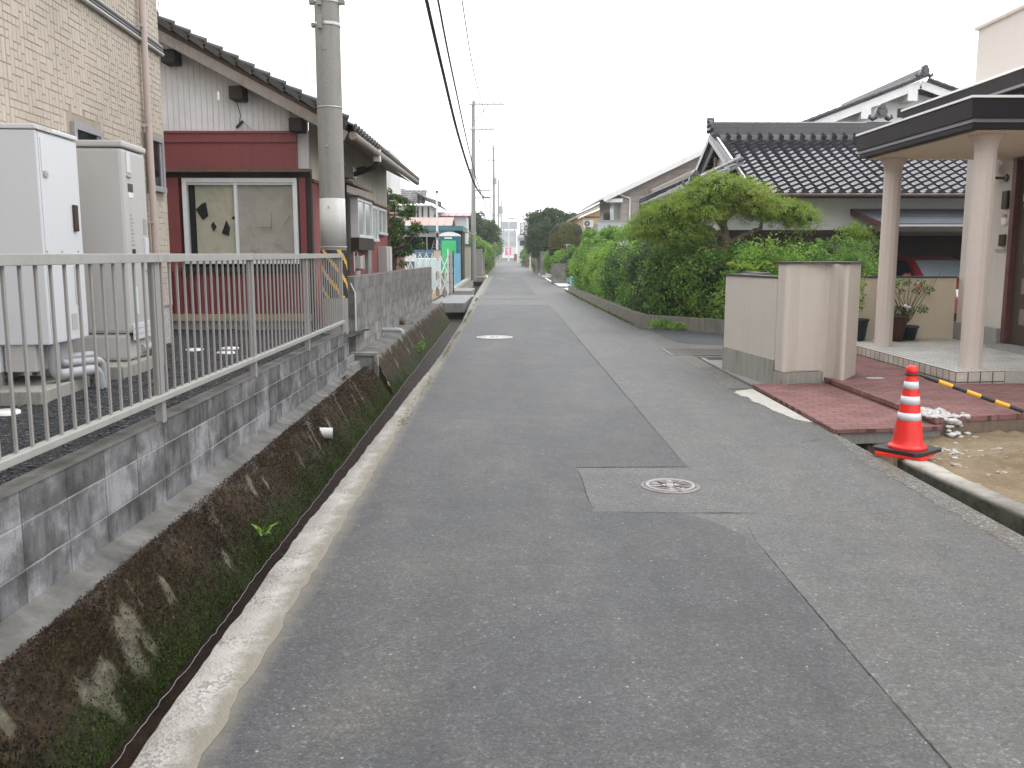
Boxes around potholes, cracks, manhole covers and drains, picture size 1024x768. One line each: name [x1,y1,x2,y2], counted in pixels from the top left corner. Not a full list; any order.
manhole cover [641,478,700,493]
drain grate [660,348,723,356]
